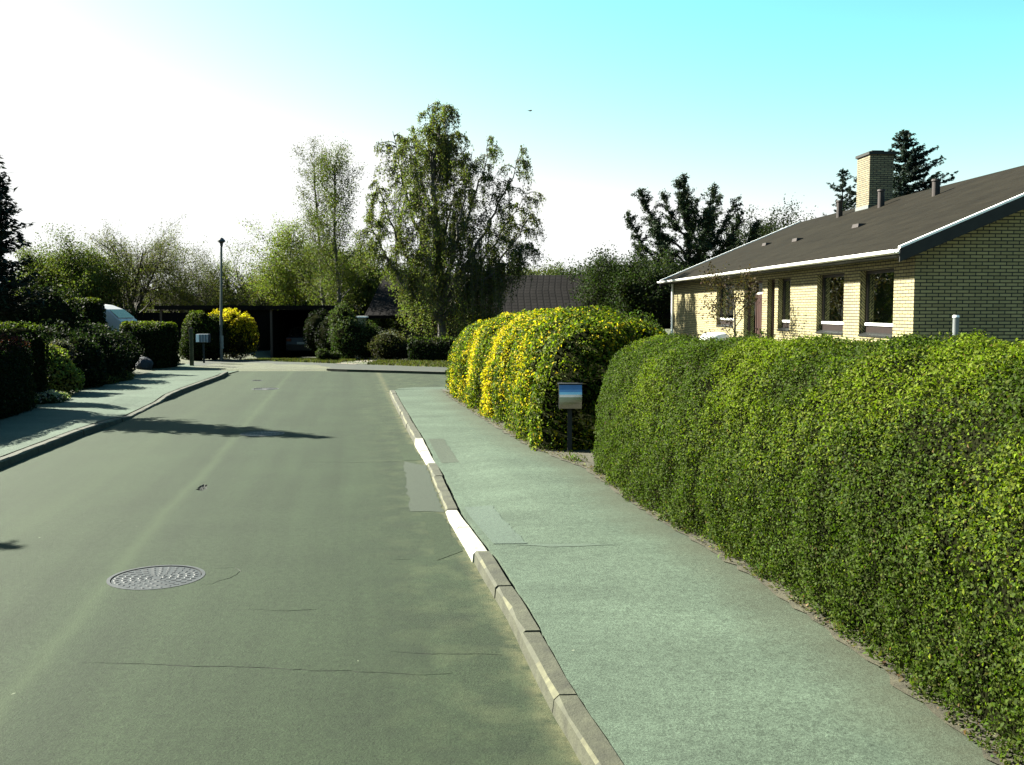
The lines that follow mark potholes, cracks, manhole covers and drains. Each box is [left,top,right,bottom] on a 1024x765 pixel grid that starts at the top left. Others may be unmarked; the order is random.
manhole cover [106,565,205,590]
crack [99,662,450,675]
